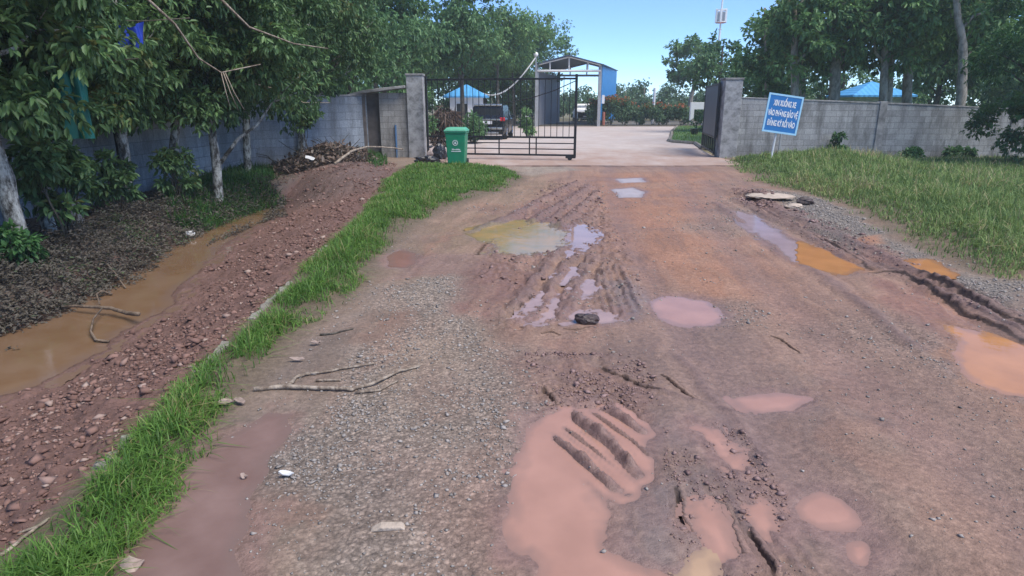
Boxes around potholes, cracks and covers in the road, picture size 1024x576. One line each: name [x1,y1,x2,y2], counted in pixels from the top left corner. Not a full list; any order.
pothole [464,218,567,258]
pothole [920,317,1024,402]
pothole [485,394,673,576]
pothole [642,292,739,330]
pothole [903,258,963,280]
pothole [791,239,867,277]
pothole [610,186,651,198]
pothole [780,480,885,538]
pothole [379,247,425,271]
pothole [729,210,800,262]
